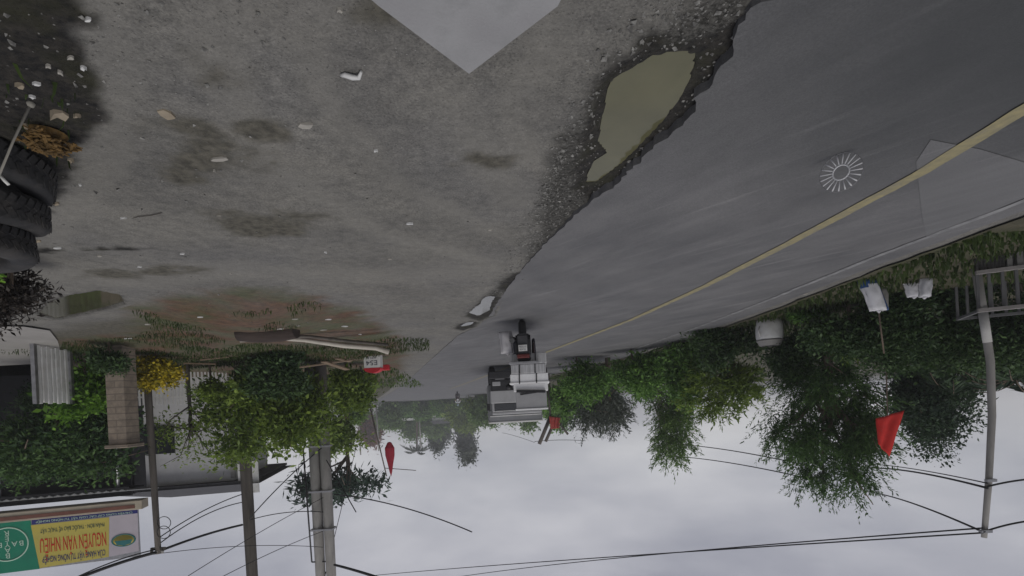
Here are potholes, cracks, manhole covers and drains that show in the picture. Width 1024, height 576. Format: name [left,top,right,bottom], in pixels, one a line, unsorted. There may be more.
pothole [557,0,751,207]
pothole [461,293,503,321]
pothole [450,320,482,331]
